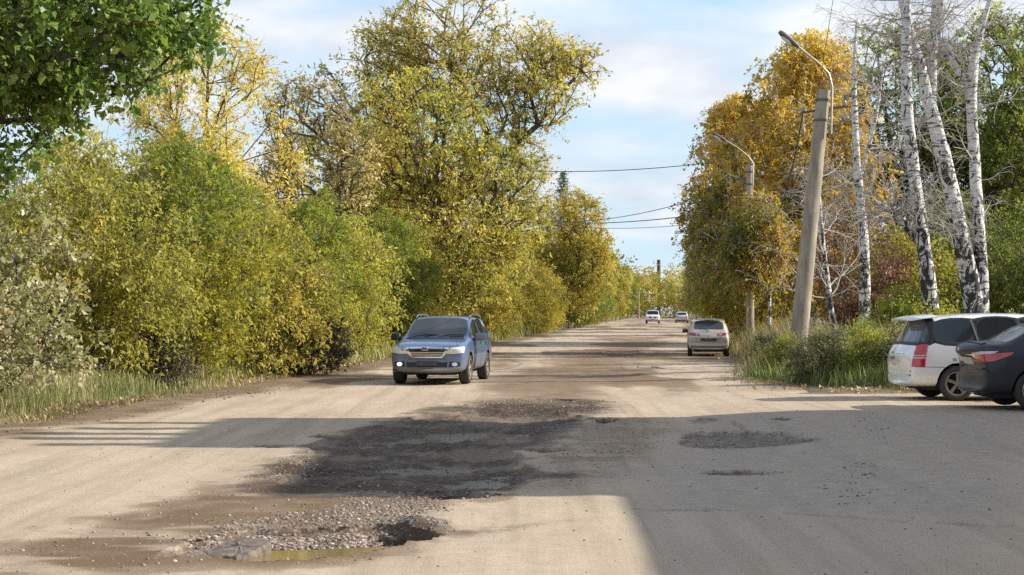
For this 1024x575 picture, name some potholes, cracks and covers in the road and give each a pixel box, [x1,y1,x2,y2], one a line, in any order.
pothole [677,431,821,449]
pothole [276,410,593,497]
pothole [455,398,605,417]
pothole [370,527,446,546]
pothole [151,521,411,562]
